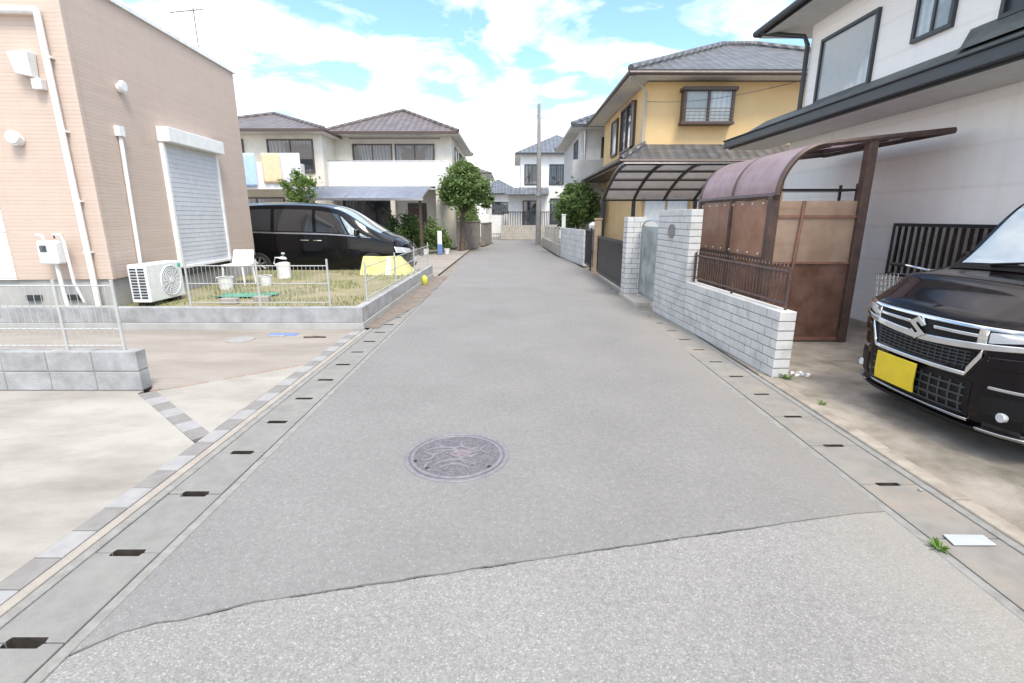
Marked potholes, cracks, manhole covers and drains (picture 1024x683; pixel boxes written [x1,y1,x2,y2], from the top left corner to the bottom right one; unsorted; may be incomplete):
manhole cover [404,433,509,482]
